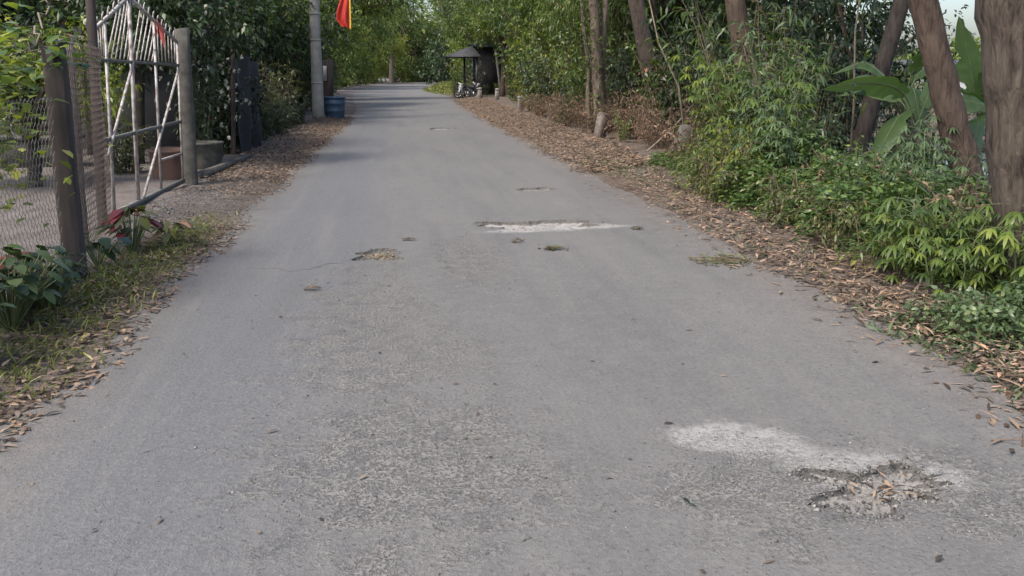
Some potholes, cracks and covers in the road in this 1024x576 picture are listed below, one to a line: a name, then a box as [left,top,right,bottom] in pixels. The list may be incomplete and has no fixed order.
crack [243,258,356,272]
pothole [788,455,962,527]
pothole [347,247,405,262]
